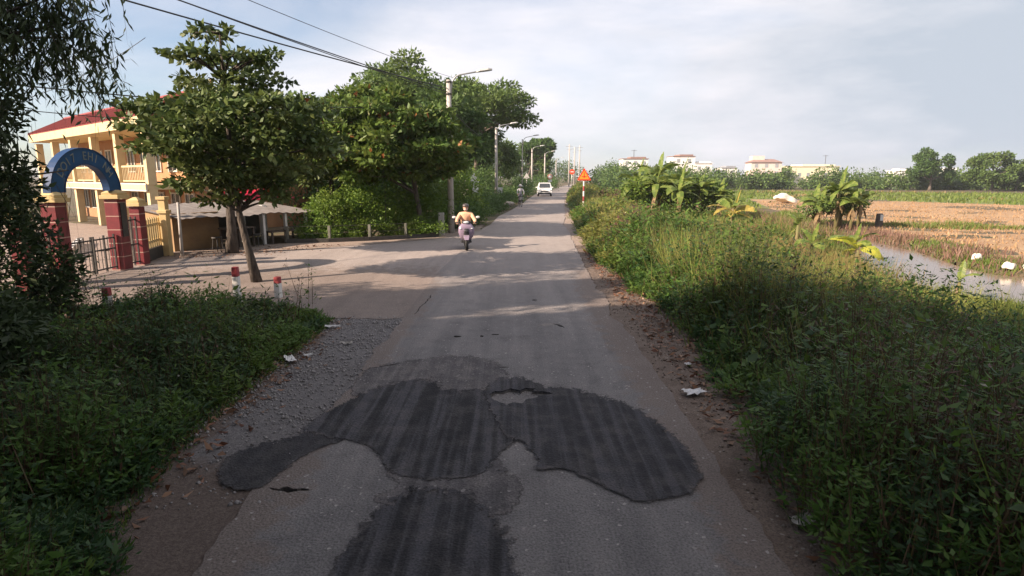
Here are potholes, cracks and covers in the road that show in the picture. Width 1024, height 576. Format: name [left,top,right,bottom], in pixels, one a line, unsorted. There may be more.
pothole [491,389,547,405]
